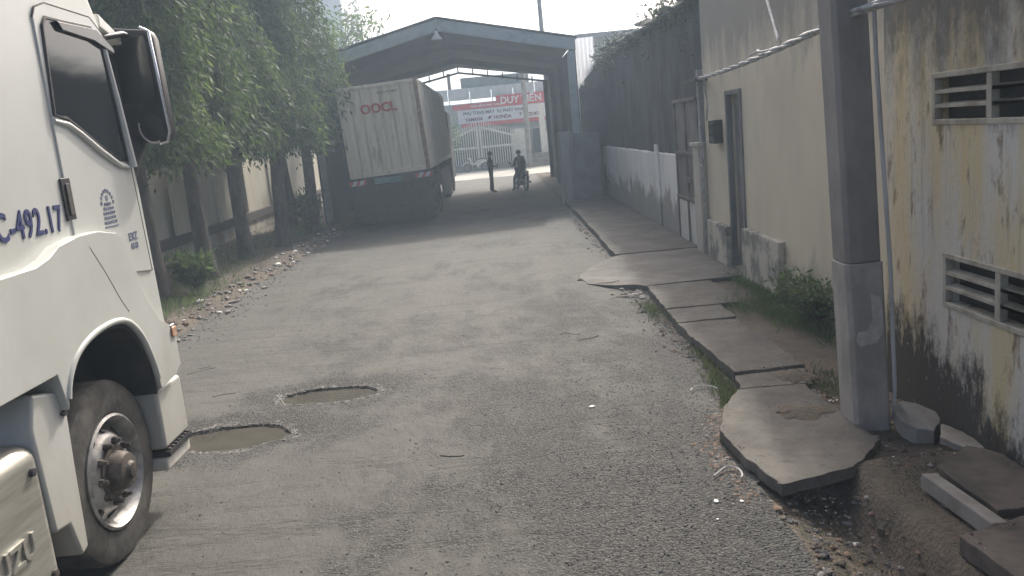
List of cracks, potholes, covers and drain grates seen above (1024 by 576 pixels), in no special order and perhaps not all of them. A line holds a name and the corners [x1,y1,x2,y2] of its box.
pothole [186,419,302,454]
pothole [272,383,392,406]
